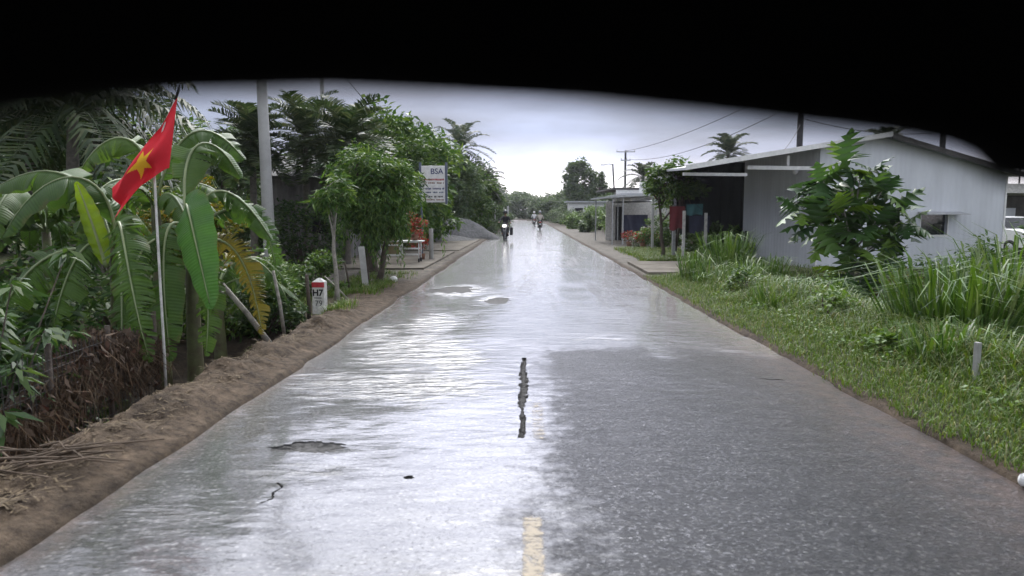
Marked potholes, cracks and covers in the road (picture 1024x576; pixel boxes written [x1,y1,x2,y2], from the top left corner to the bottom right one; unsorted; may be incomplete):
pothole [269,441,349,453]
crack [517,358,530,438]
